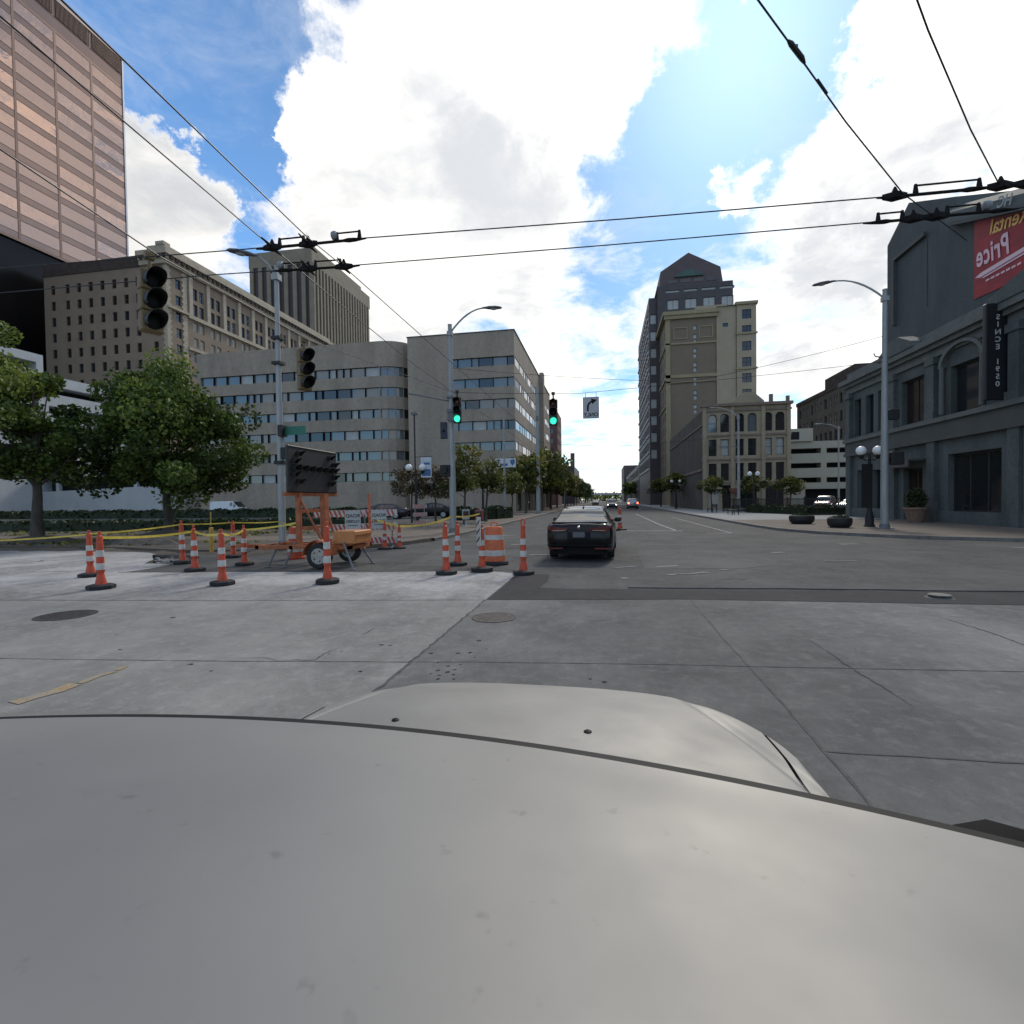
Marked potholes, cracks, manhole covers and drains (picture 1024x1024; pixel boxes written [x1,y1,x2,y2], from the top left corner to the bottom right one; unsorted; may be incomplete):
manhole cover [32,610,99,621]
manhole cover [472,612,516,623]
